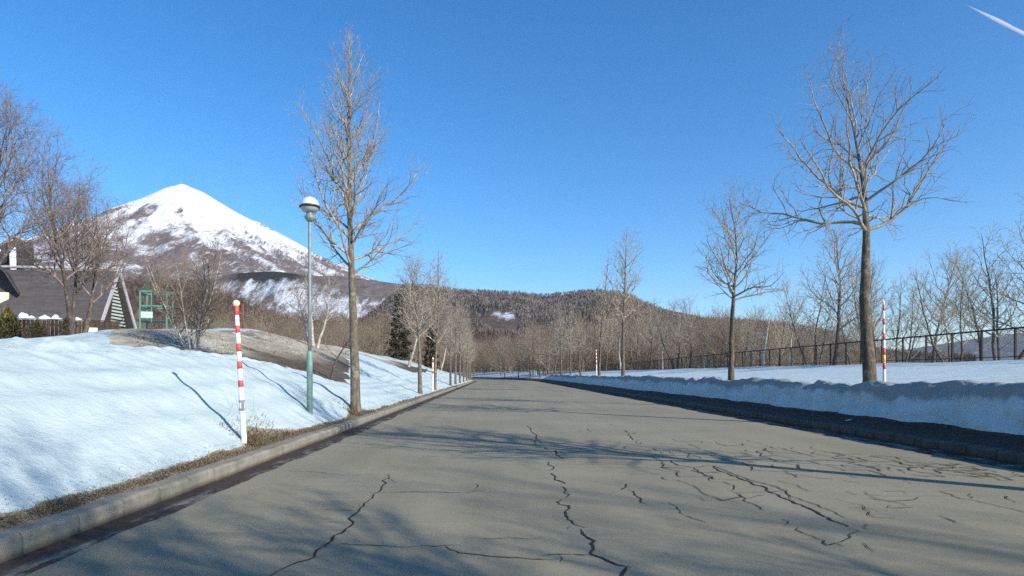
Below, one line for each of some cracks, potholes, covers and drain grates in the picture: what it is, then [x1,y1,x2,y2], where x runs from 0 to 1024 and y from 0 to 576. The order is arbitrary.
crack [269,425,630,576]
crack [651,440,1022,550]
